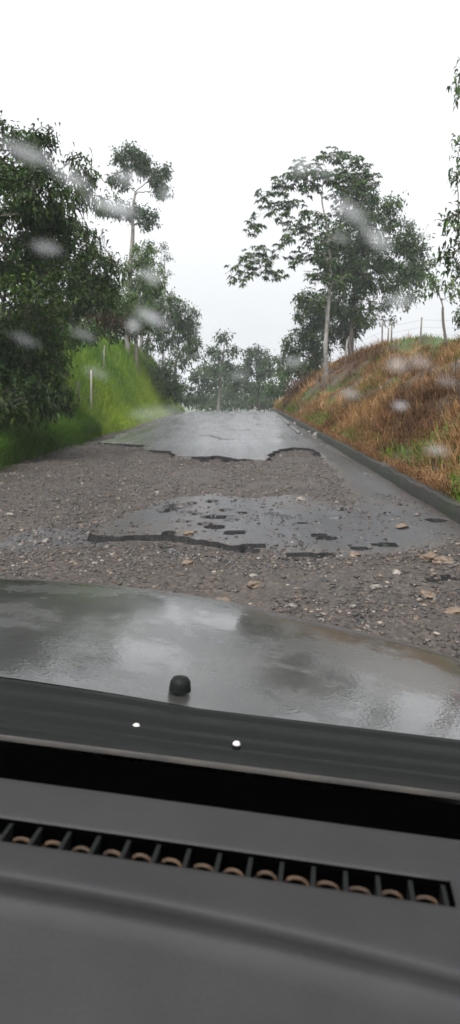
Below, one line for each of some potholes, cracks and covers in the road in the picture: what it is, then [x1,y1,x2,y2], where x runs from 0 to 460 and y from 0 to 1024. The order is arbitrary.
pothole [0,412,358,525]
